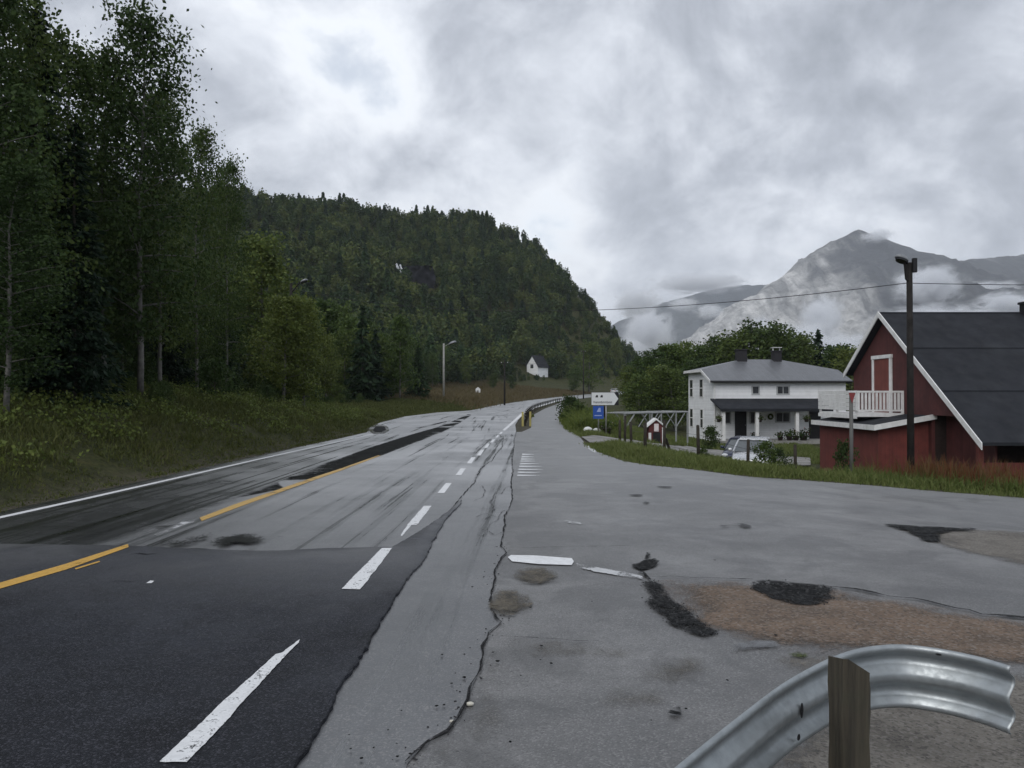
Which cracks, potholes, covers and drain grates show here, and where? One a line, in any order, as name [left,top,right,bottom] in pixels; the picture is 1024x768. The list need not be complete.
pothole [208,534,263,545]
crack [392,433,596,763]
pothole [885,524,976,541]
pothole [752,580,832,605]
crack [833,586,1024,618]
pothole [644,581,717,635]
